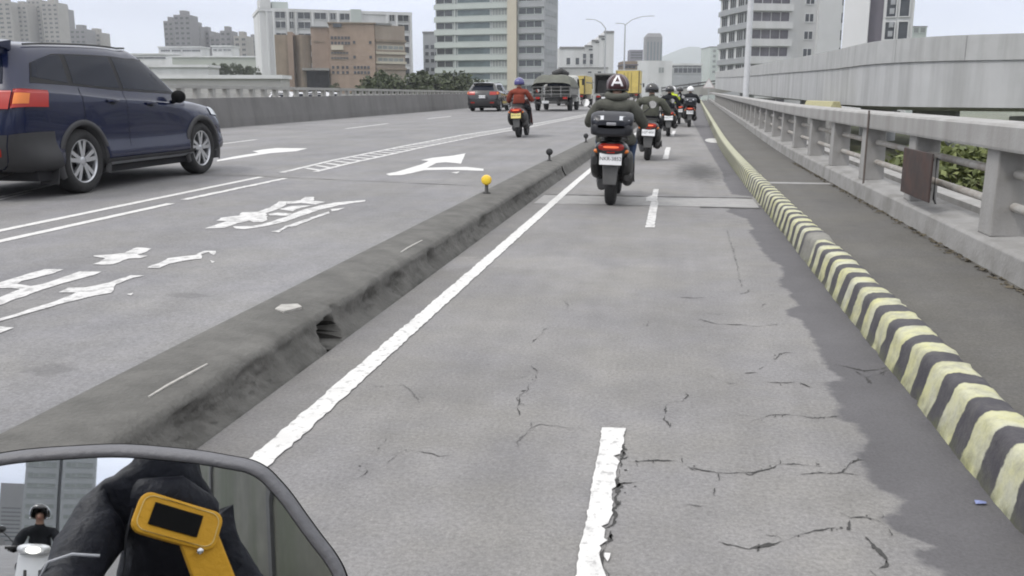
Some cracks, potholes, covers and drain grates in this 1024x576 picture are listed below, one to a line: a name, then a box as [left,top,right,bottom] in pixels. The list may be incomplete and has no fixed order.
crack [599,444,862,576]
crack [494,368,568,452]
crack [712,352,810,387]
crack [718,513,893,575]
